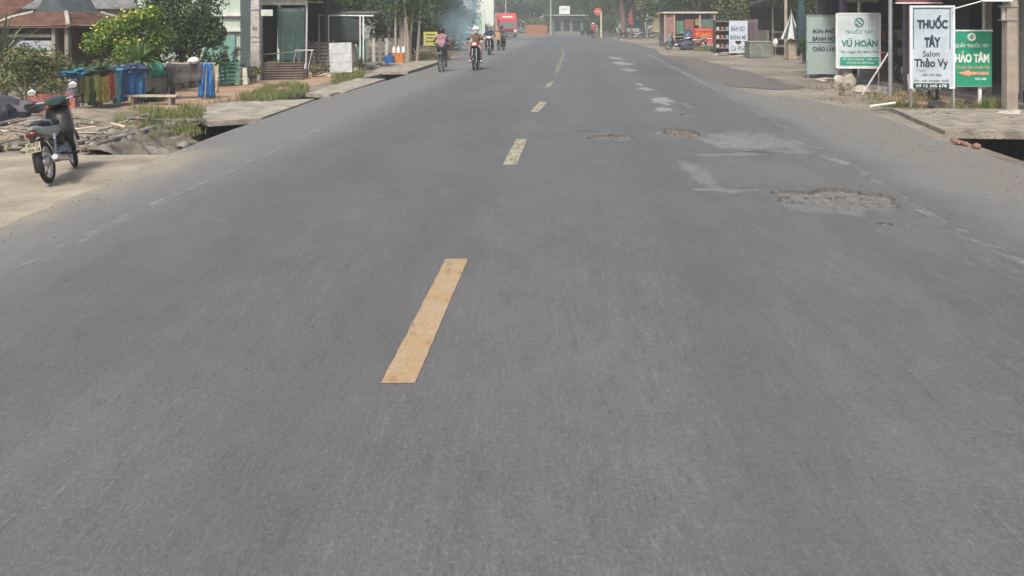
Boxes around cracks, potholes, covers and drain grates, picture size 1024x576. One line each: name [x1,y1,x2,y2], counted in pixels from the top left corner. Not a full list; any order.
pothole [770,188,902,210]
pothole [663,128,700,138]
